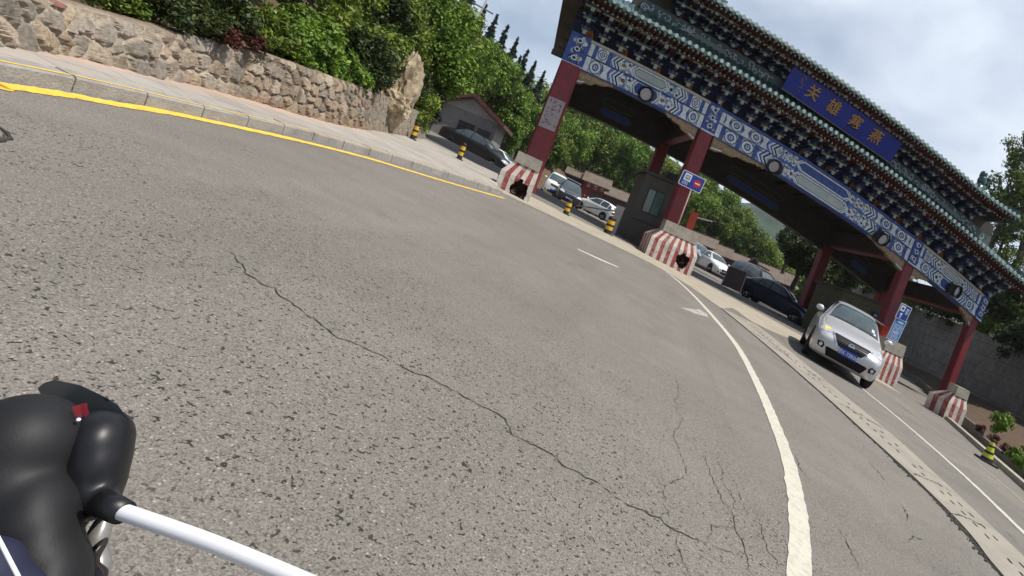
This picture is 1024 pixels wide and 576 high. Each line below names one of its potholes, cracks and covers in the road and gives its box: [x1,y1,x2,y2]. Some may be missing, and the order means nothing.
crack [705,457,778,571]
crack [227,249,737,574]
